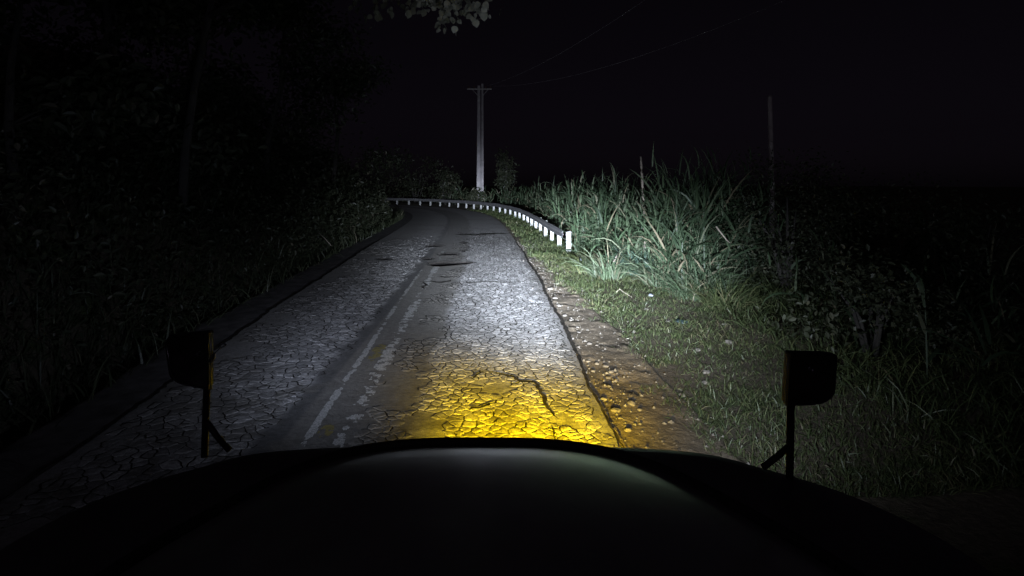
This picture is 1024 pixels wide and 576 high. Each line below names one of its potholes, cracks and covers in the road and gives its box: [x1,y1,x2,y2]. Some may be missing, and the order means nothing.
crack [344,230,625,448]
crack [0,232,436,529]
